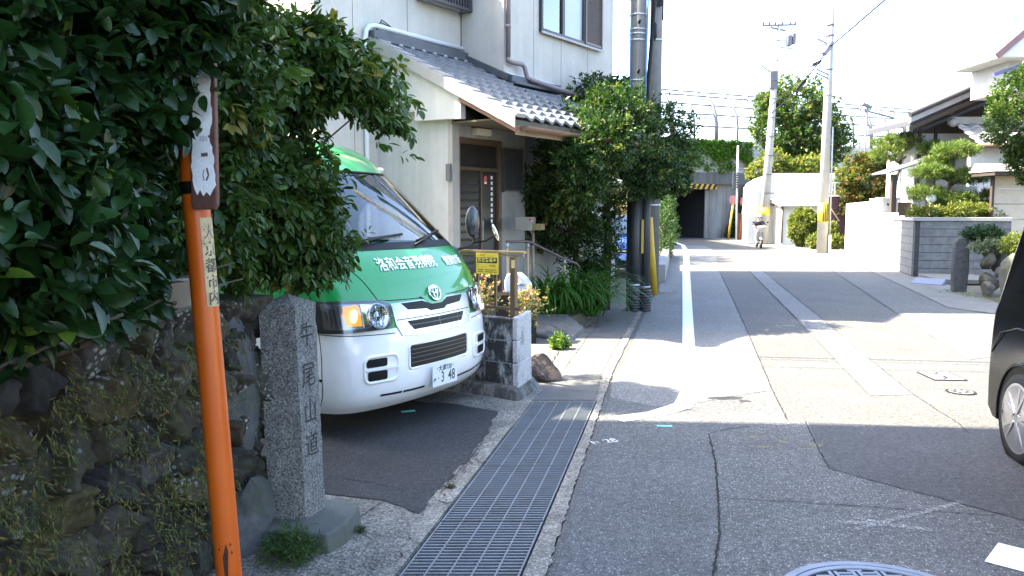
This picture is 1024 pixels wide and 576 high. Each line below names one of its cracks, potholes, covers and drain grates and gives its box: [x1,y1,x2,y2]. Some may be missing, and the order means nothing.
drain grate [399,522,543,576]
utility cover [917,372,966,380]
drain grate [484,428,584,469]
drain grate [513,401,596,430]
drain grate [442,466,567,525]
manhole cover [784,561,934,576]
